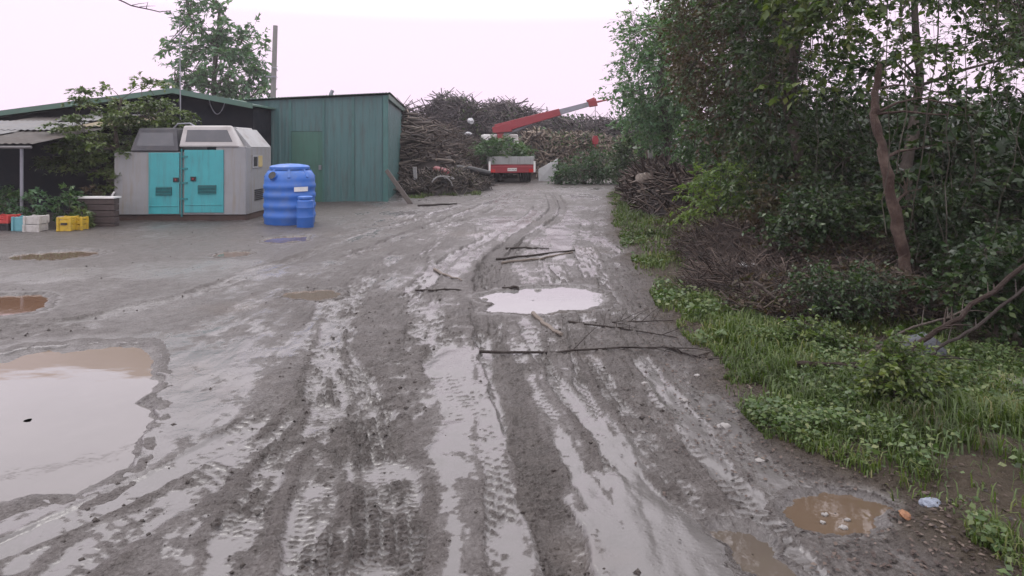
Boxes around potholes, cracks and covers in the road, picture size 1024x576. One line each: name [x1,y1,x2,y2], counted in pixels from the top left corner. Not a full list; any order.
pothole [0,337,174,521]
pothole [695,514,811,576]
pothole [764,482,895,538]
pothole [0,291,61,317]
pothole [472,284,618,316]
